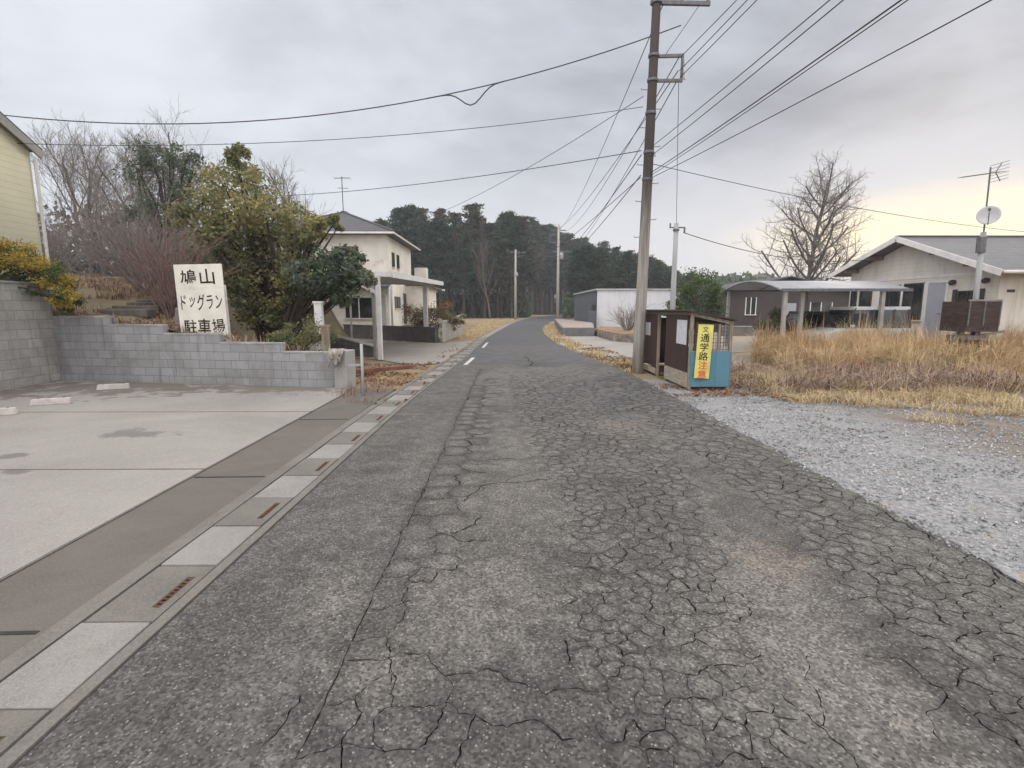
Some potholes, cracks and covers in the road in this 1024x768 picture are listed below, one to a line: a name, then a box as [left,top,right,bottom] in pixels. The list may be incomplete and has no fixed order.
crack [261,368,859,768]
crack [600,372,1024,750]
